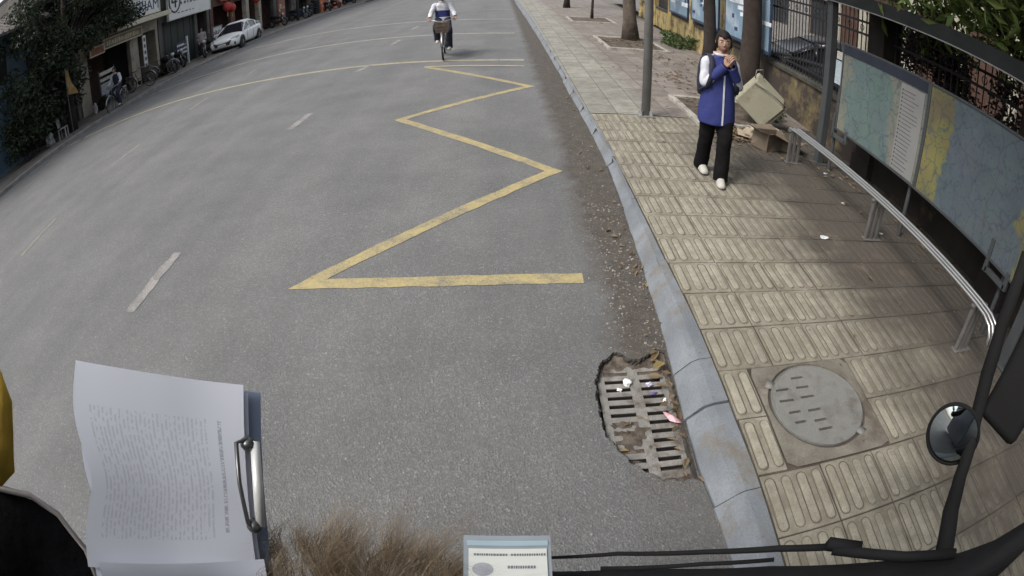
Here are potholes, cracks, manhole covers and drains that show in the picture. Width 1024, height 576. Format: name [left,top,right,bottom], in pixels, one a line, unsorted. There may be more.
drain grate [597,367,690,480]
manhole cover [751,359,888,466]
